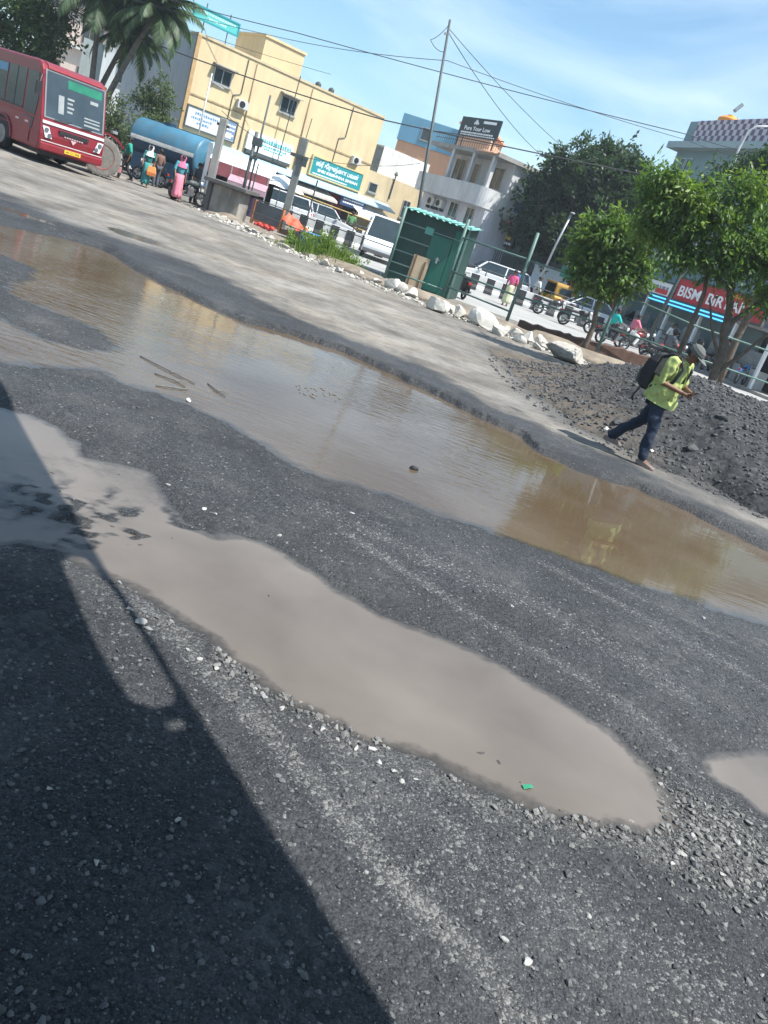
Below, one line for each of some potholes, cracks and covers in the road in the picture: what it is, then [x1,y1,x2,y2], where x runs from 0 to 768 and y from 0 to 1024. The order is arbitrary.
pothole [0,224,768,627]
pothole [697,743,768,821]
pothole [0,407,687,839]
